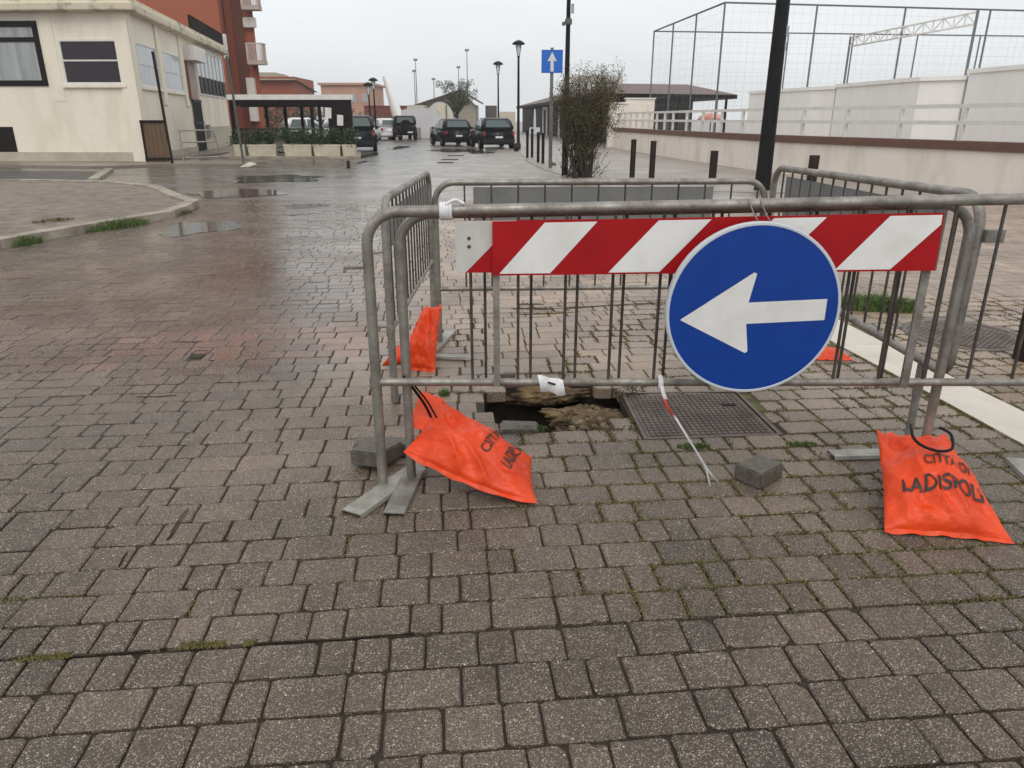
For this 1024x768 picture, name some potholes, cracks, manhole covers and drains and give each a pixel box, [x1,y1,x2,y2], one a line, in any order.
pothole [483,386,642,435]
manhole cover [621,391,783,440]
manhole cover [901,320,1018,352]
